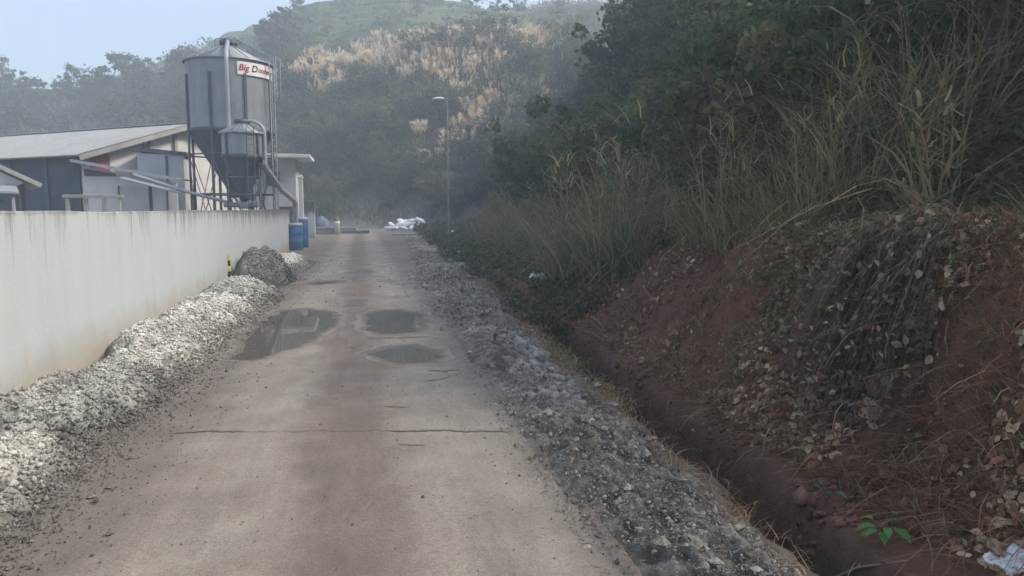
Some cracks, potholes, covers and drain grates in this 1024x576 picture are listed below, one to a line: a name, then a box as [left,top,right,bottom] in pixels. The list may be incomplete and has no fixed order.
pothole [353,342,455,367]
pothole [350,308,437,337]
pothole [217,307,346,364]
